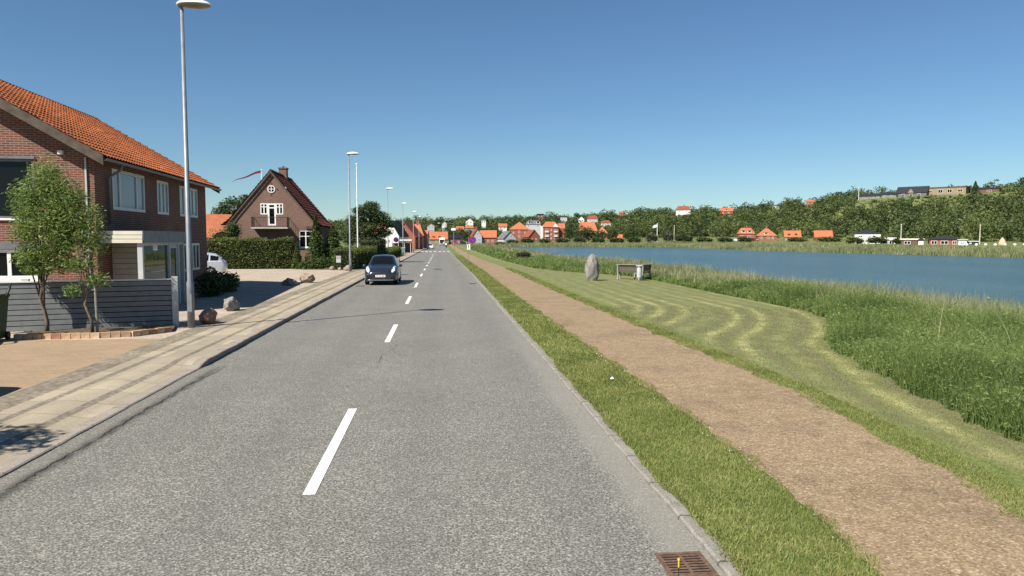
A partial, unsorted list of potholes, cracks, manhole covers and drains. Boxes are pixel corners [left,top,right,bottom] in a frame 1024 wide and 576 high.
drain grate [654,551,720,576]
